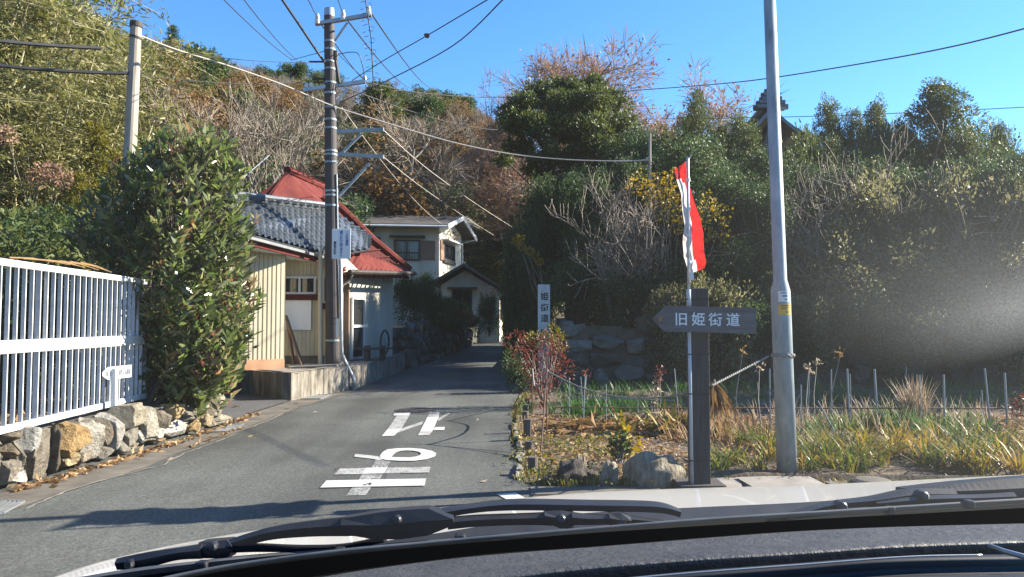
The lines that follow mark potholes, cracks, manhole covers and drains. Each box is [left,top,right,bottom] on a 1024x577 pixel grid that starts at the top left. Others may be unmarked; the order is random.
drain grate [0,499,25,515]
